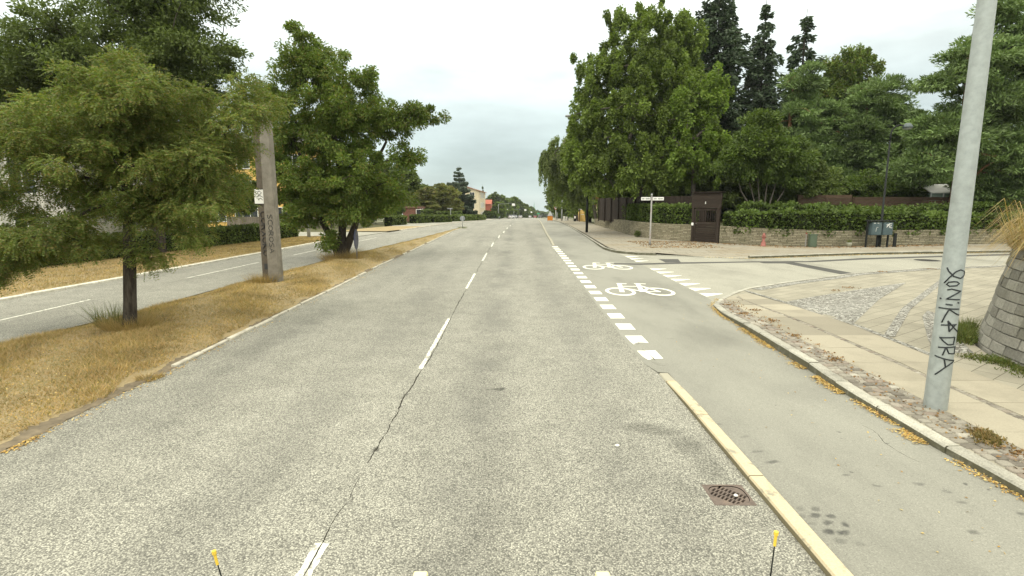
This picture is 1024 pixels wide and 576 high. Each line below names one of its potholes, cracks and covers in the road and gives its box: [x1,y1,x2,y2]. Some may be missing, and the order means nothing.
drain grate [701,484,757,506]
crack [304,238,498,576]
